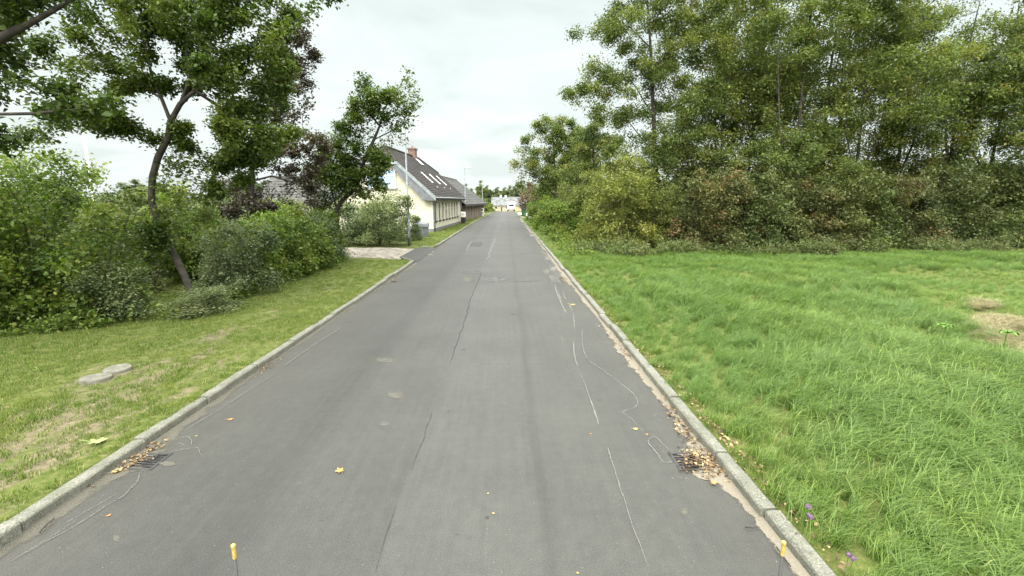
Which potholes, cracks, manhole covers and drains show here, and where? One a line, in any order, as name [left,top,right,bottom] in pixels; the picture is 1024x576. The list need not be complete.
drain grate [668,452,710,471]
drain grate [123,453,173,470]
